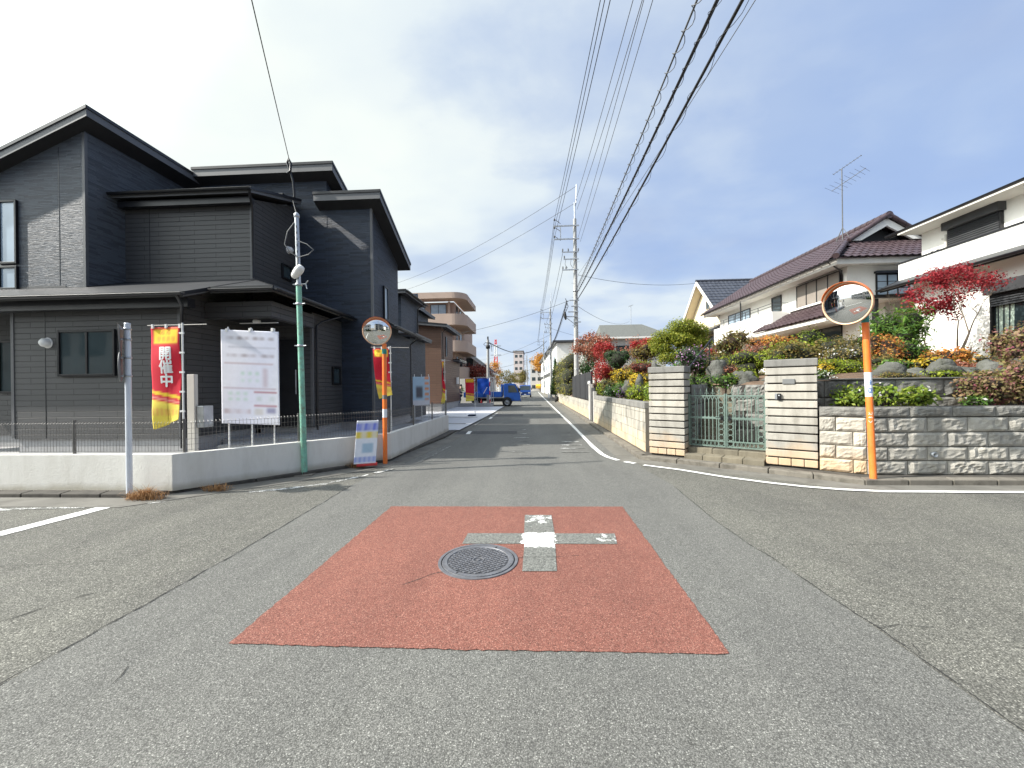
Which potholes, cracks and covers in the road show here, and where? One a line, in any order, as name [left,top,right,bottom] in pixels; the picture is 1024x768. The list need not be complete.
manhole cover [438,544,518,580]
